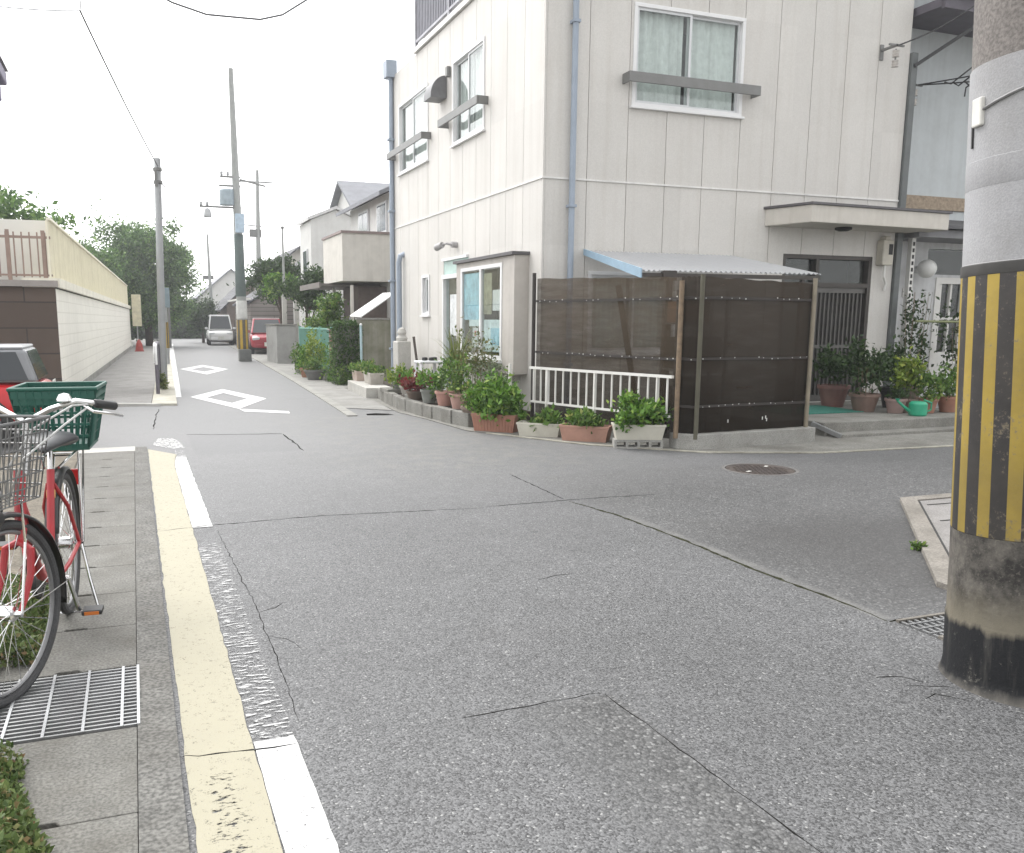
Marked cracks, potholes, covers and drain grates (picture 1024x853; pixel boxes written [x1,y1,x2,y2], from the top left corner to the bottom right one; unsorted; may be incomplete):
manhole cover [721,463,800,476]
crack [876,676,964,700]
drain grate [0,664,140,746]
drain grate [896,612,945,640]
